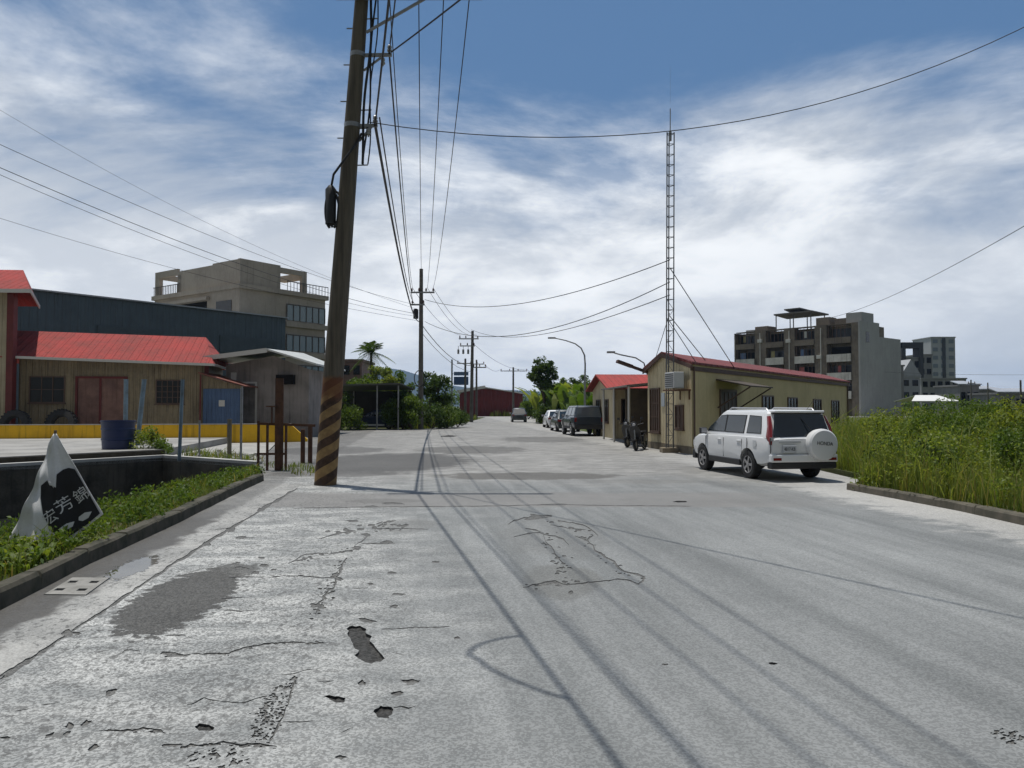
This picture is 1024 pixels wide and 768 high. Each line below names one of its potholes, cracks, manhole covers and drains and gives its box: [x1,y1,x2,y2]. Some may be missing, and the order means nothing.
pothole [373,706,393,718]
crack [229,520,414,619]
pothole [347,626,385,664]
crack [509,514,646,590]
crack [99,634,331,768]
pothole [195,723,215,731]
